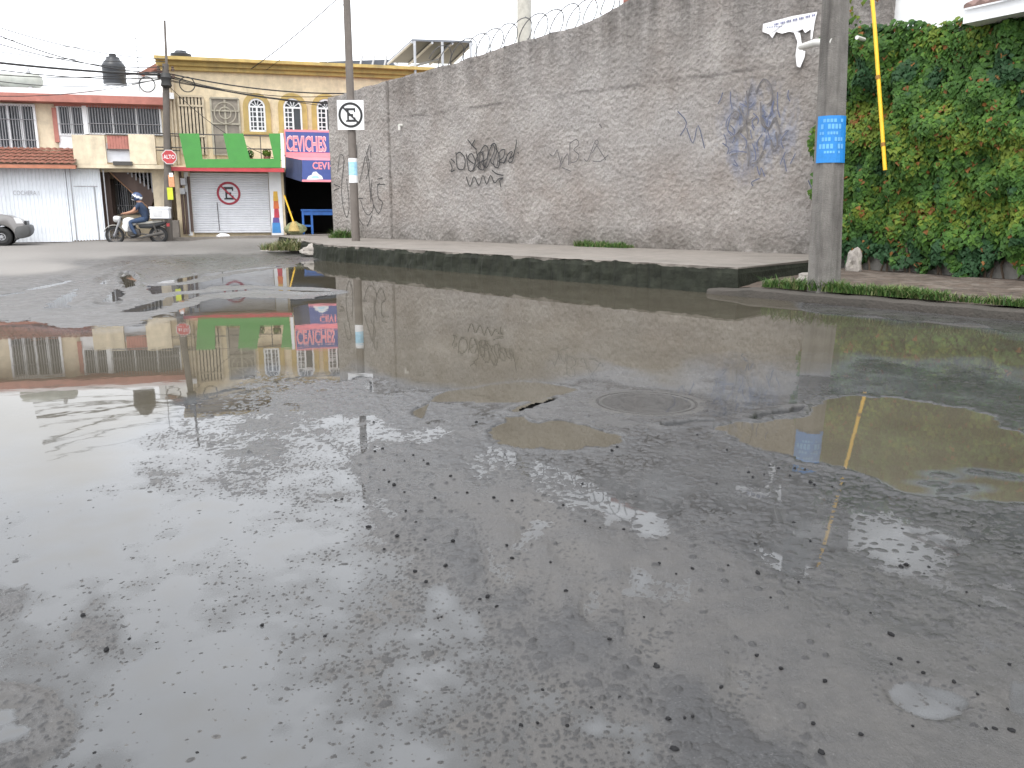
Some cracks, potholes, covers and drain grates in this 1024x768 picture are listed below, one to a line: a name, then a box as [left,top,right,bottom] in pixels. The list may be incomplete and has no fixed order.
pothole [712,393,1024,508]
manhole cover [588,390,707,417]
